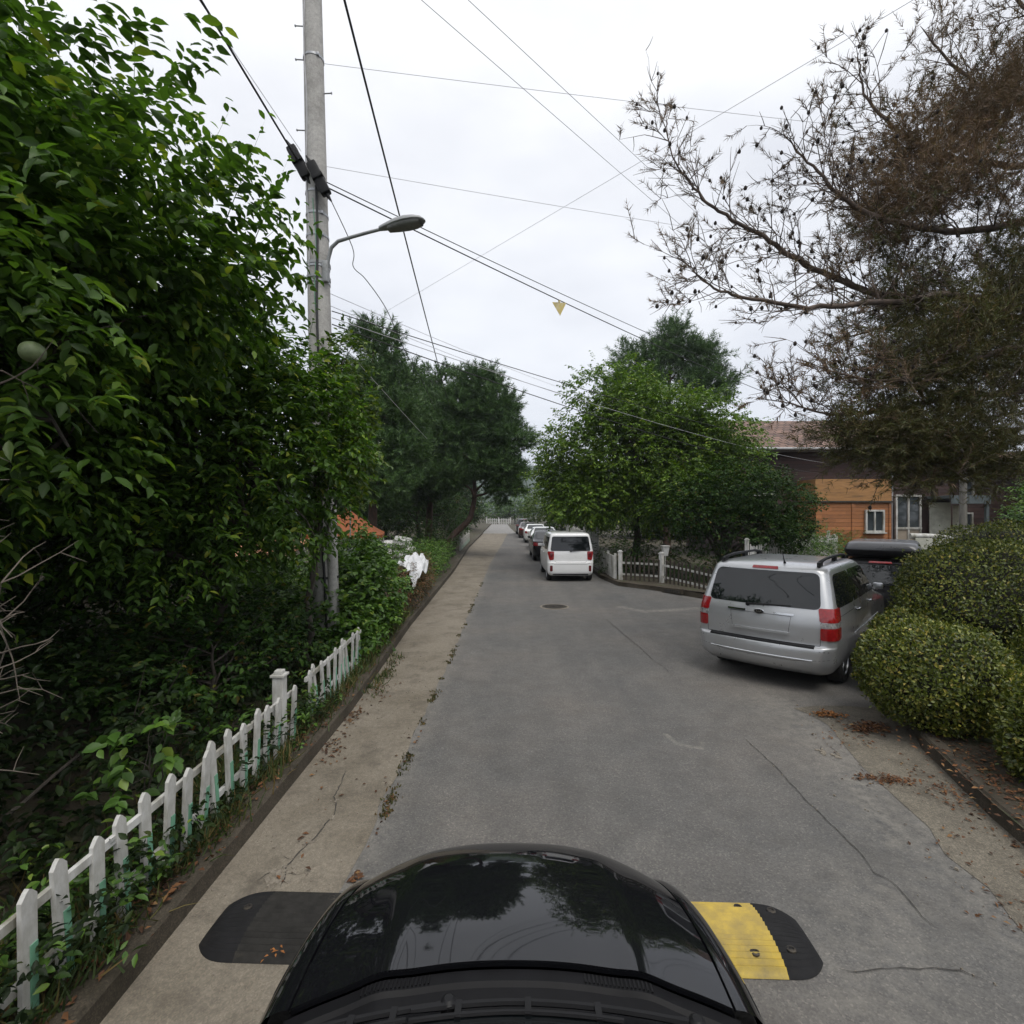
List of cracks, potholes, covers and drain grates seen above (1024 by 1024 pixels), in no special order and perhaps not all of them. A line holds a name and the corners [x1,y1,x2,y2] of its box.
crack [839,965,997,986]
crack [747,740,933,925]
crack [256,771,346,887]
